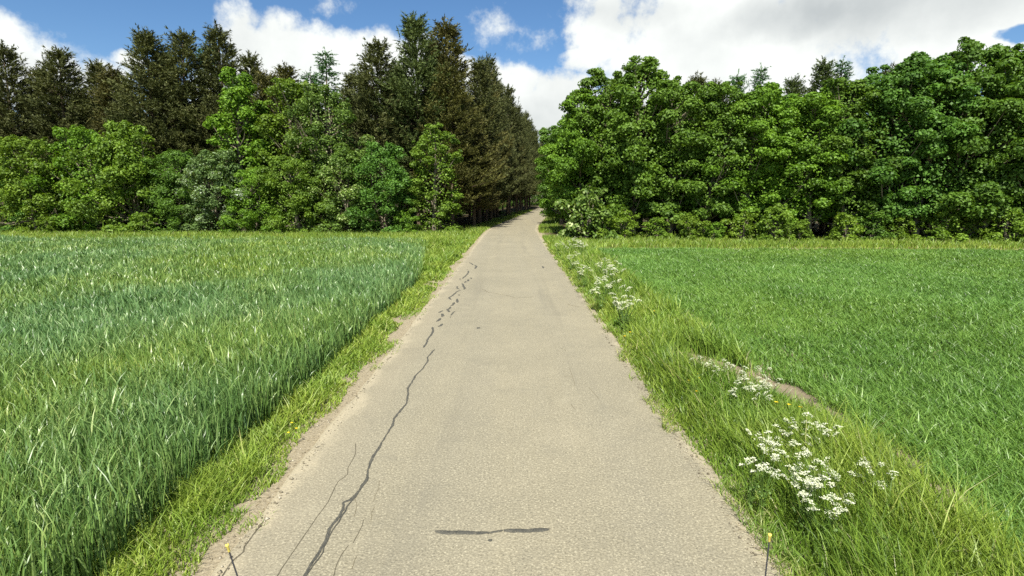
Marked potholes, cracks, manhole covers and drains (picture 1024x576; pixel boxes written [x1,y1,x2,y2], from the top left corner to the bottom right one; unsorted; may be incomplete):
crack [222,443,380,576]
crack [437,262,520,327]
